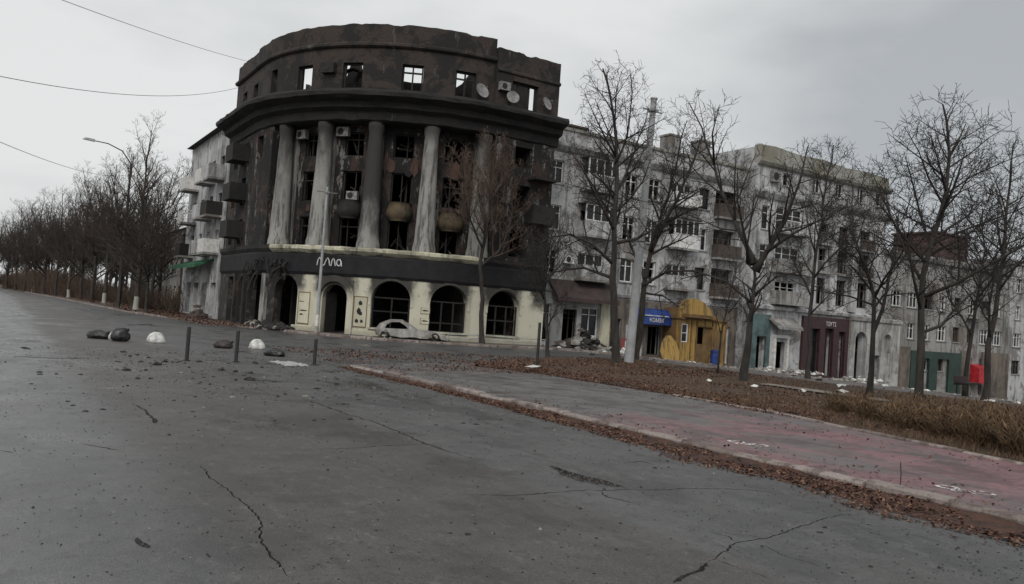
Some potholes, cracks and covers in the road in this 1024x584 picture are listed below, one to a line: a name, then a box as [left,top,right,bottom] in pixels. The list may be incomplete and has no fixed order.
crack [466,488,780,503]
crack [301,398,469,458]
crack [200,466,293,581]
pothole [549,466,626,488]
crack [673,514,848,583]
